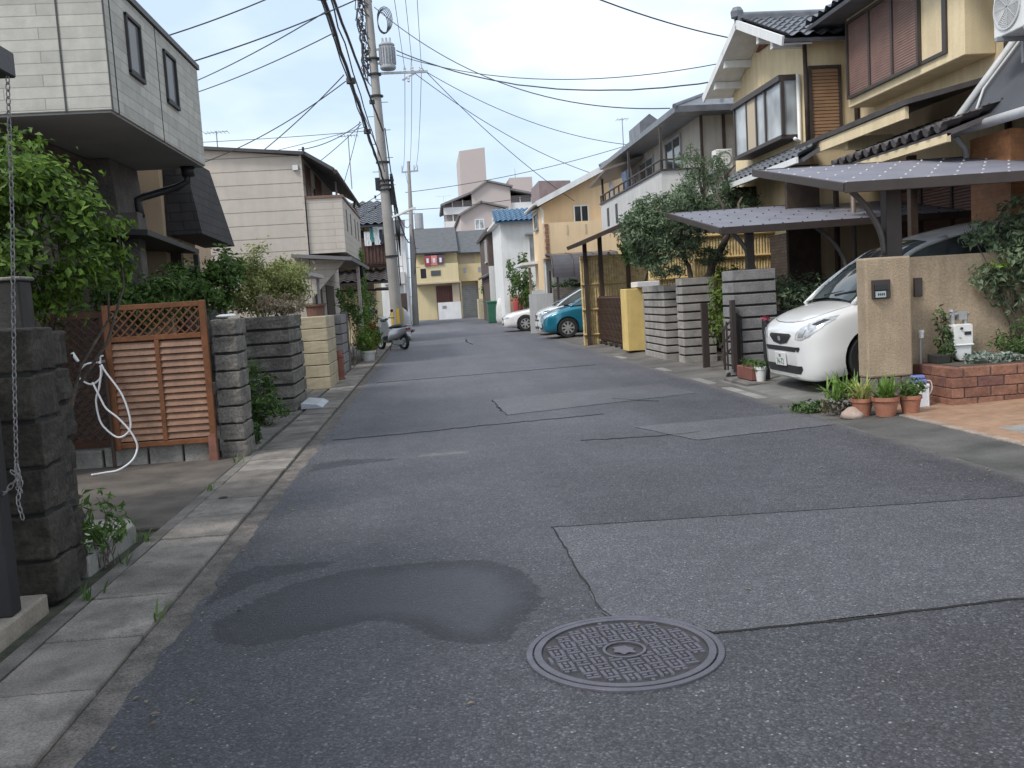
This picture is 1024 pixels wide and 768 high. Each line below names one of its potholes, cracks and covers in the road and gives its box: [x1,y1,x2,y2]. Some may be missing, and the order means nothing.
manhole cover [526,615,725,693]
